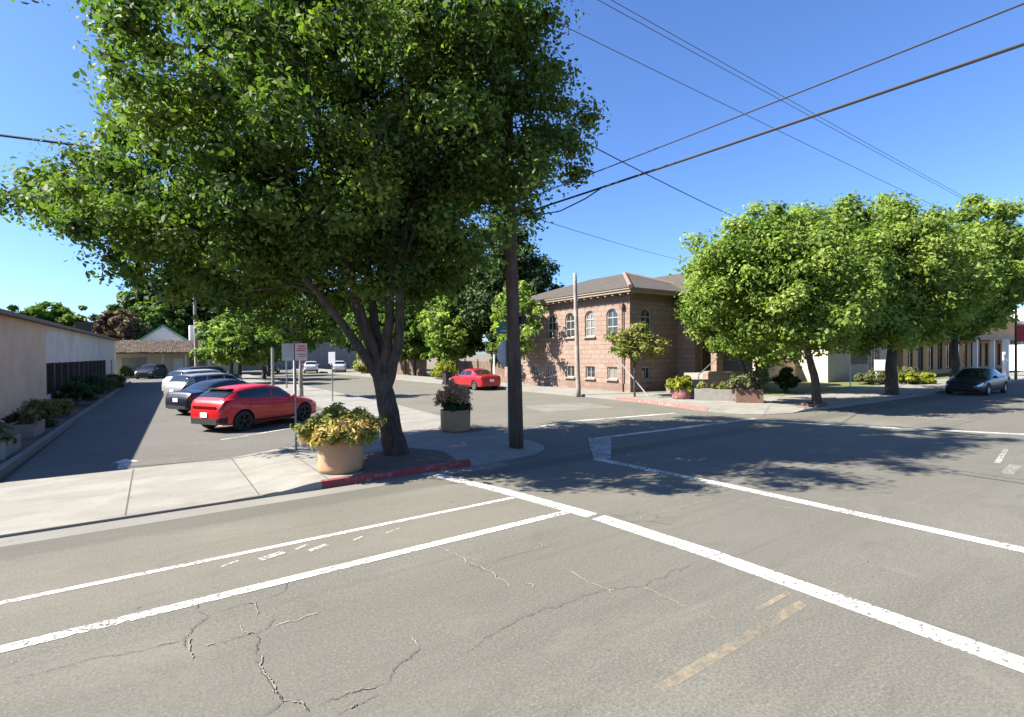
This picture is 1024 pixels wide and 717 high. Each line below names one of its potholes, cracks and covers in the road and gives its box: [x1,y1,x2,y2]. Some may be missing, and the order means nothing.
crack [318,637,419,715]
crack [470,559,714,650]
crack [429,543,552,589]
crack [11,578,316,715]
